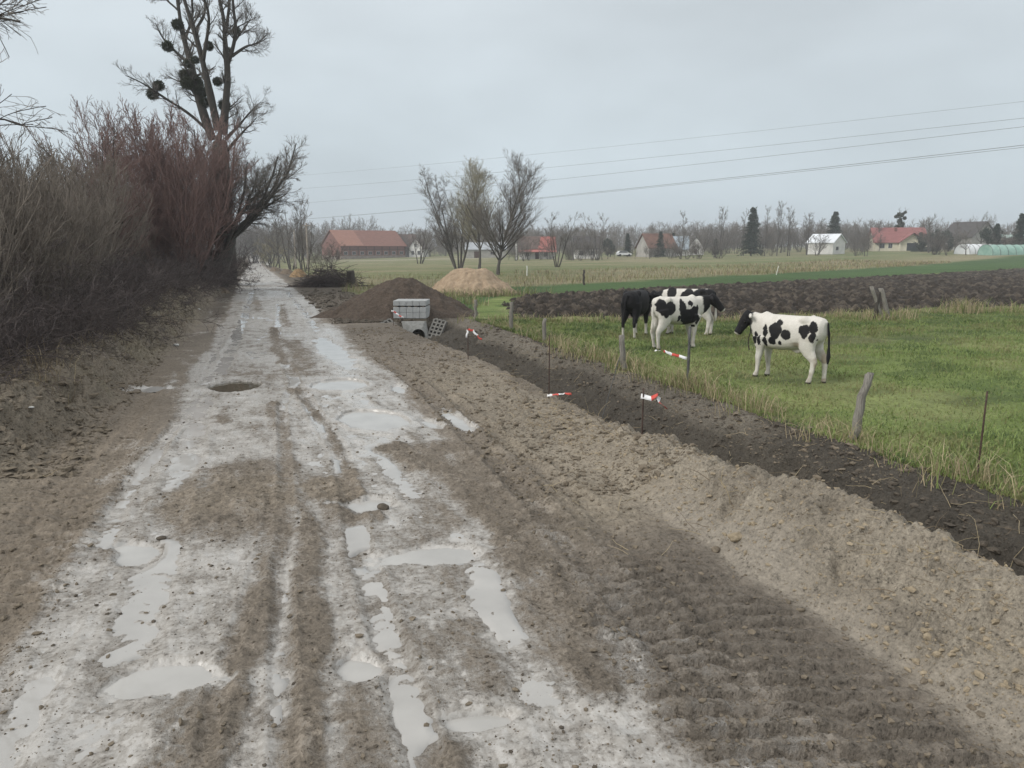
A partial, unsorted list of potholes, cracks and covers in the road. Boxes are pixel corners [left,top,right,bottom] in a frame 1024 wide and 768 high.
pothole [197,379,270,395]
